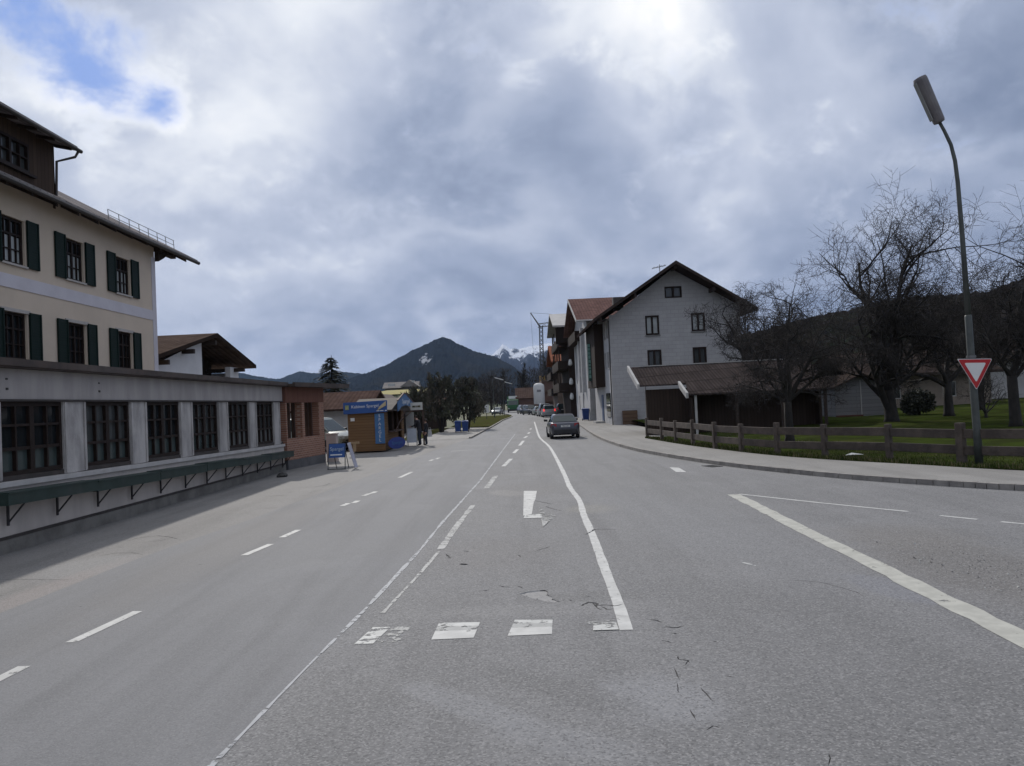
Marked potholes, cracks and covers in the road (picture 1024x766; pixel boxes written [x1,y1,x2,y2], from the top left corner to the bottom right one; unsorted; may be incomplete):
crack [655,620,690,692]
crack [570,596,612,610]
pothole [520,590,559,602]
